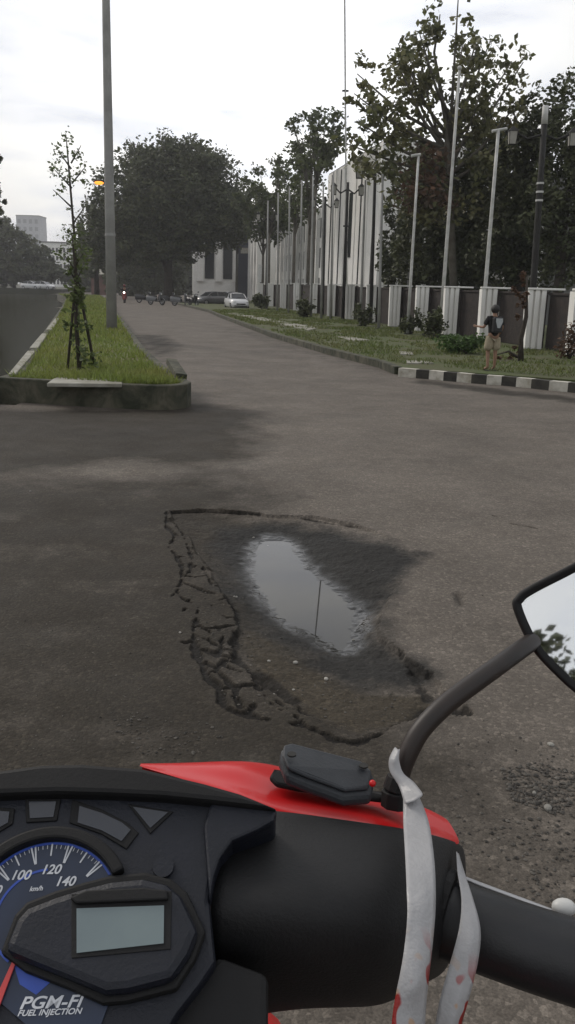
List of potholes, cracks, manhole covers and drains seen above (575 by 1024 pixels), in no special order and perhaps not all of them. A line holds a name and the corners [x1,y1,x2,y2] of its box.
crack [163,511,385,747]
pothole [168,508,475,737]
